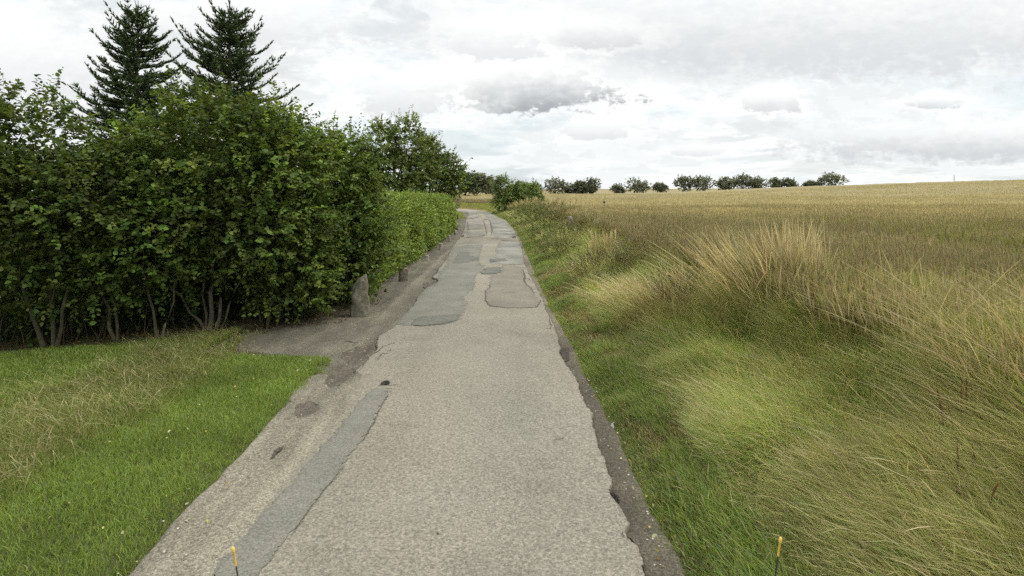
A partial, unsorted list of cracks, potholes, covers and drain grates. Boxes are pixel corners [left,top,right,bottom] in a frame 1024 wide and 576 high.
crack [338,341,395,386]
